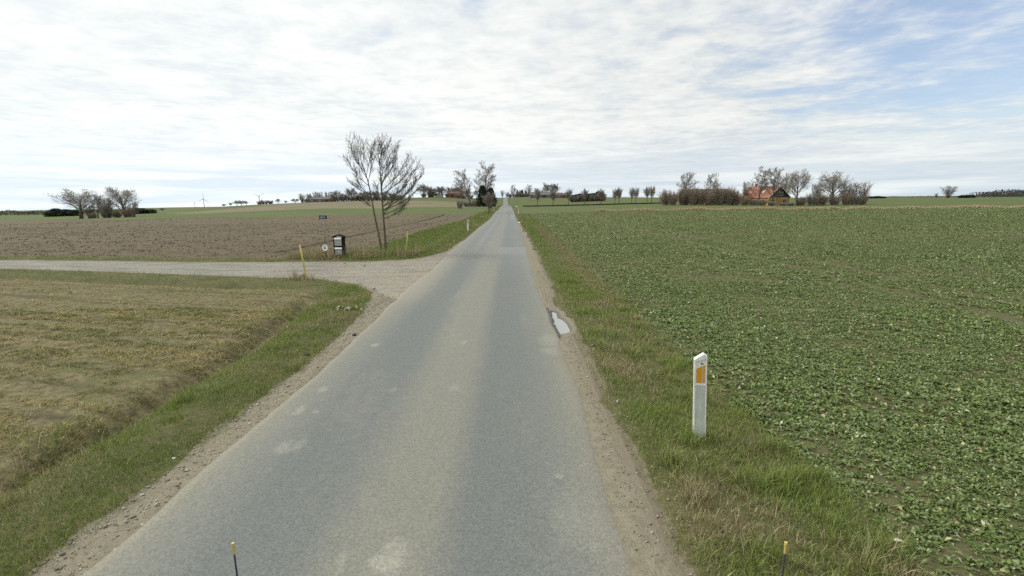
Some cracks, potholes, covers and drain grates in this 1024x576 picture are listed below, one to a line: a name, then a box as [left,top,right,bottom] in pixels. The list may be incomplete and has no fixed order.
pothole [547,307,578,337]
